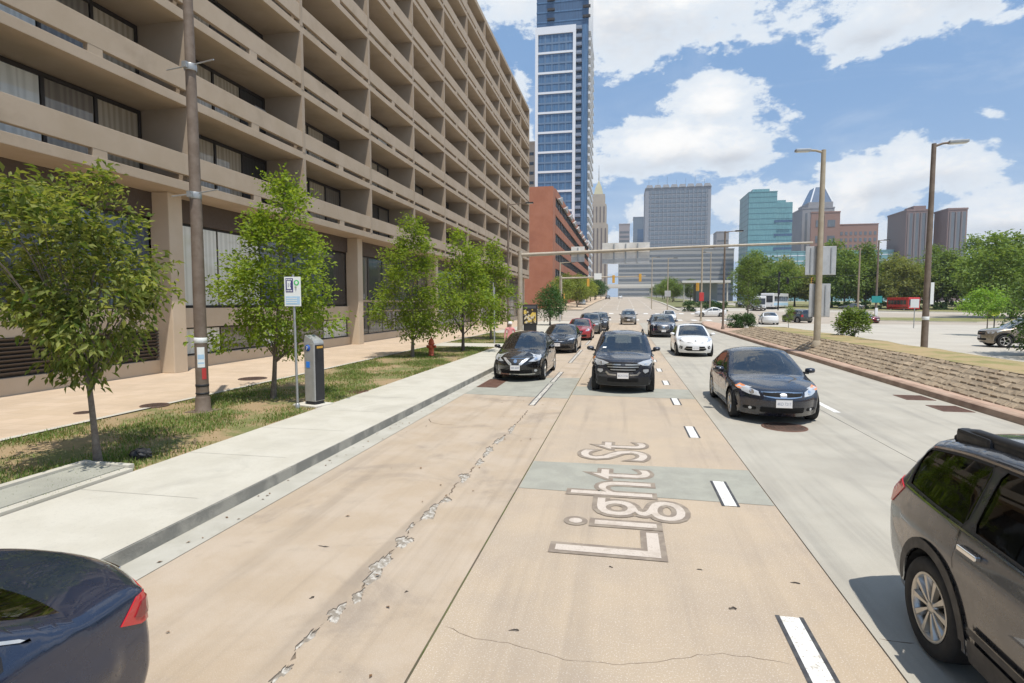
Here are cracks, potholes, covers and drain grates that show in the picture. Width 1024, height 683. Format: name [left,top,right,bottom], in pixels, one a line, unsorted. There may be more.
pothole [420,503,439,520]
crack [449,627,796,666]
pothole [362,552,393,585]
pothole [395,536,414,549]
pothole [352,587,366,604]
pothole [326,601,347,624]
manhole cover [761,422,808,432]
